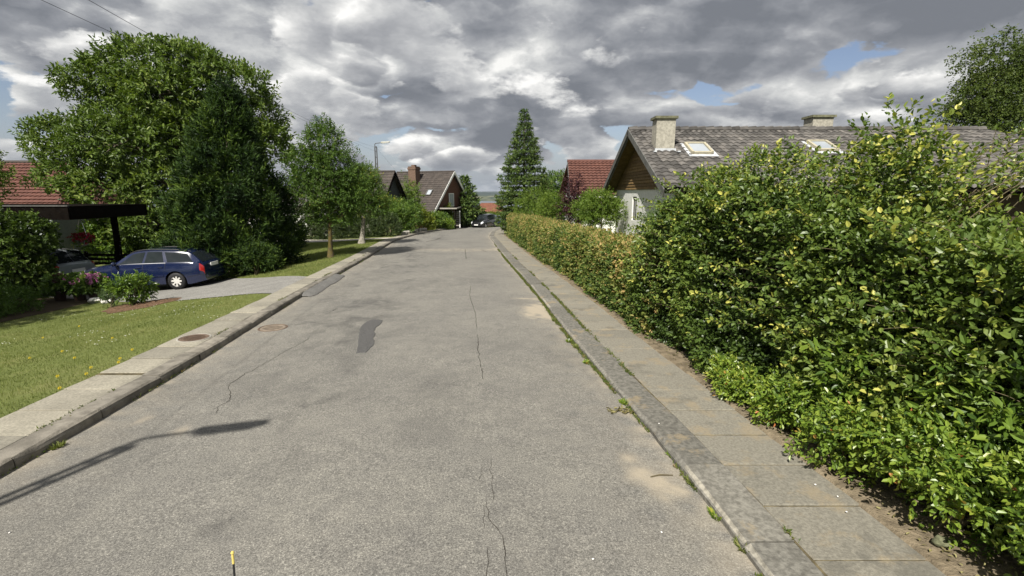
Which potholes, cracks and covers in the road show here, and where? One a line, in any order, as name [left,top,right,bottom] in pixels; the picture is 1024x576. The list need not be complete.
manhole cover [176,333,212,342]
manhole cover [257,324,288,332]
crack [479,458,507,576]
